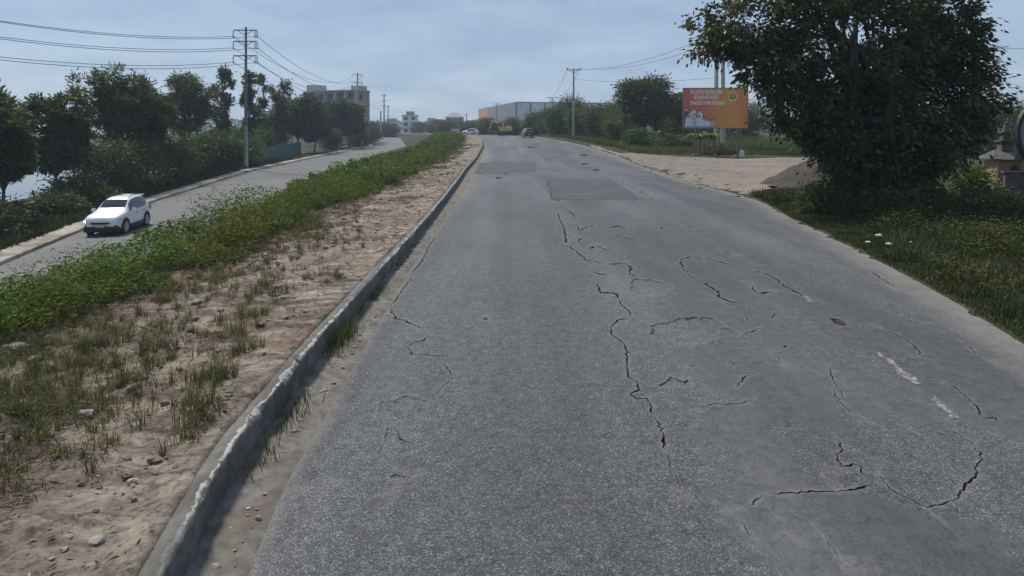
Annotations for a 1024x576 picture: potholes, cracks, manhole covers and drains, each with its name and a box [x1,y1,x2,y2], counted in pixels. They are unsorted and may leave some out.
crack [390,238,453,391]
crack [477,172,998,538]
